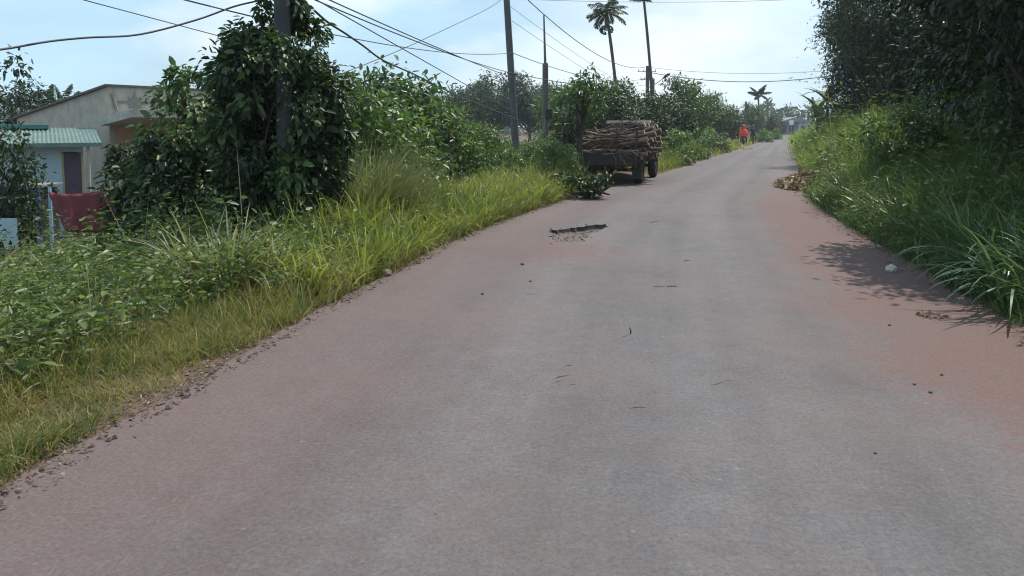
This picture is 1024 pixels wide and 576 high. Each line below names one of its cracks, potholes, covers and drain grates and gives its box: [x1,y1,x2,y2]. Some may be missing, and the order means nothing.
pothole [542,224,608,244]
